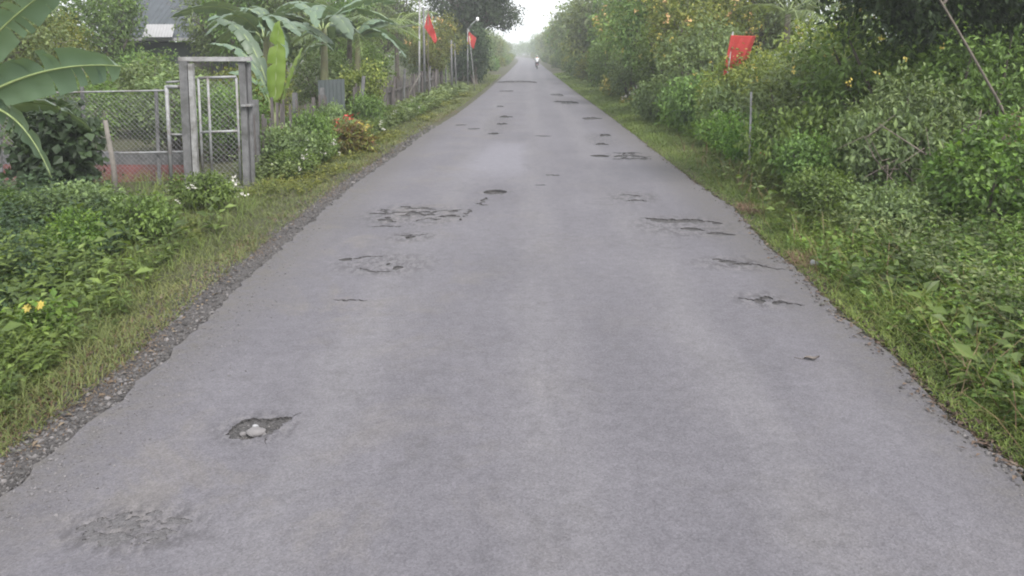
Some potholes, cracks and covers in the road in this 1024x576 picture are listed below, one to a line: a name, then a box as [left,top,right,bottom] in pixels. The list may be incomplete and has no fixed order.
pothole [225,412,301,445]
pothole [76,509,193,547]
